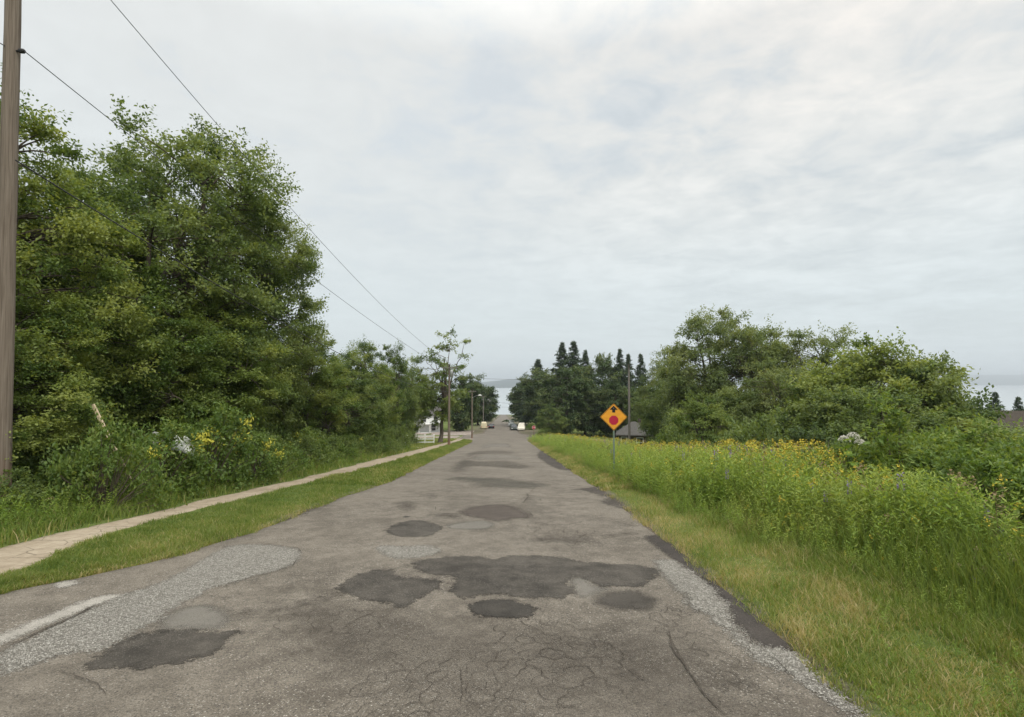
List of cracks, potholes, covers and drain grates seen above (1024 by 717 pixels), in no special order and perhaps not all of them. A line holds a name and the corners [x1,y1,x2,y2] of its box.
crack [649,606,760,710]
crack [328,596,648,717]
